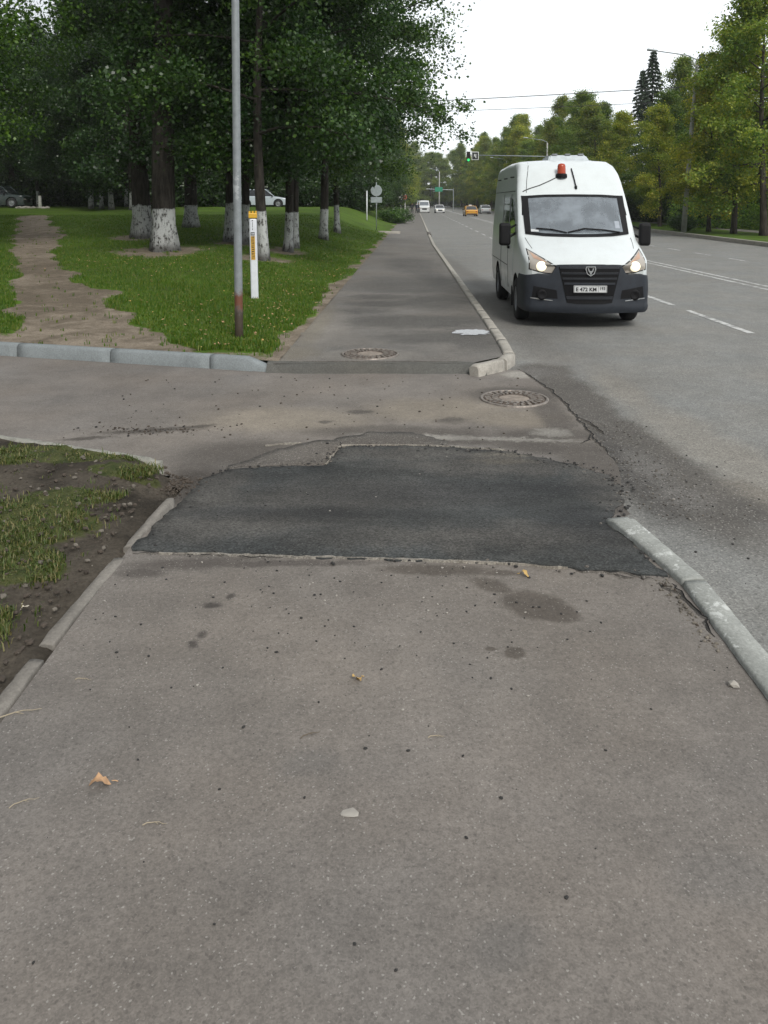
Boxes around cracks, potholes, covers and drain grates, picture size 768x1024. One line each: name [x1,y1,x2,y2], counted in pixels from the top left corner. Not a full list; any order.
manhole cover [480,390,549,408]
crack [519,369,615,460]
manhole cover [341,348,399,360]
